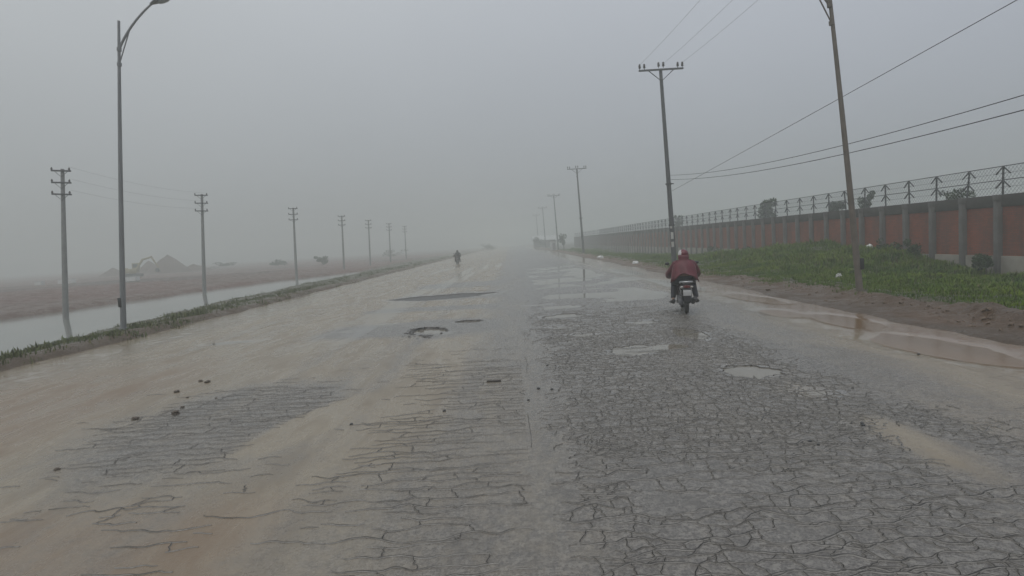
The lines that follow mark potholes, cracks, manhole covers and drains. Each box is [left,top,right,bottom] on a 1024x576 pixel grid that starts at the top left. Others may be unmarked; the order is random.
pothole [720,365,786,380]
pothole [409,327,449,335]
crack [0,295,1024,576]
pothole [610,344,660,357]
